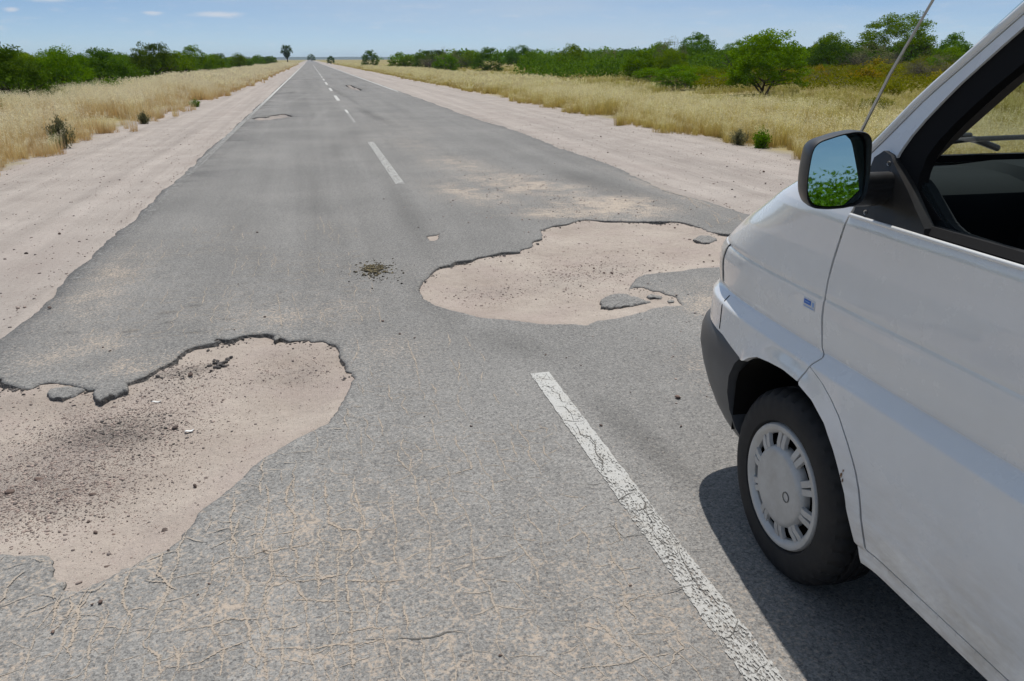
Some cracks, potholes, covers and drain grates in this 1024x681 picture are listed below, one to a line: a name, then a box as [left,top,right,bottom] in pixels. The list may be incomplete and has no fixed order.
crack [0,375,766,681]
pothole [419,220,730,325]
pothole [0,334,355,592]
